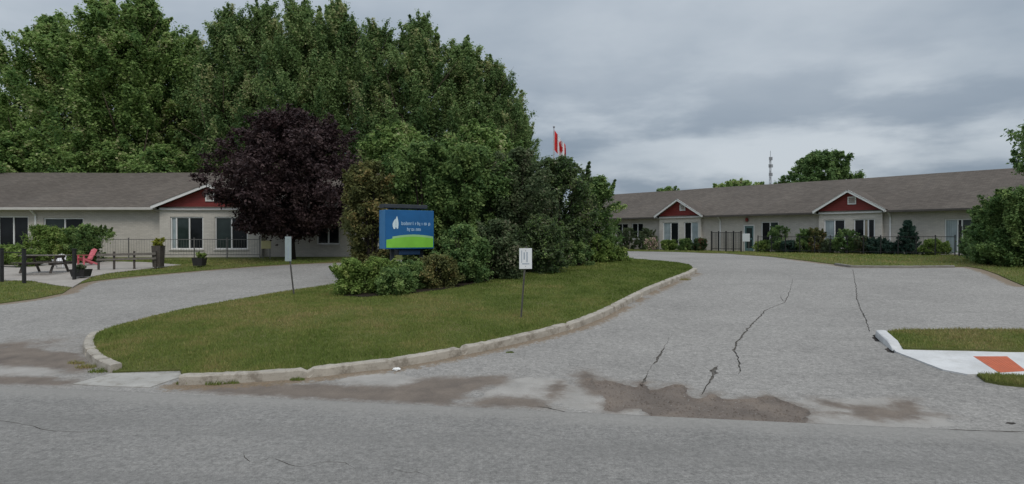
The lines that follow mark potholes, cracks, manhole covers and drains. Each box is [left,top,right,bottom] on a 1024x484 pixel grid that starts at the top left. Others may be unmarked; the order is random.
crack [702,284,792,394]
crack [853,271,870,333]
crack [641,338,669,383]
